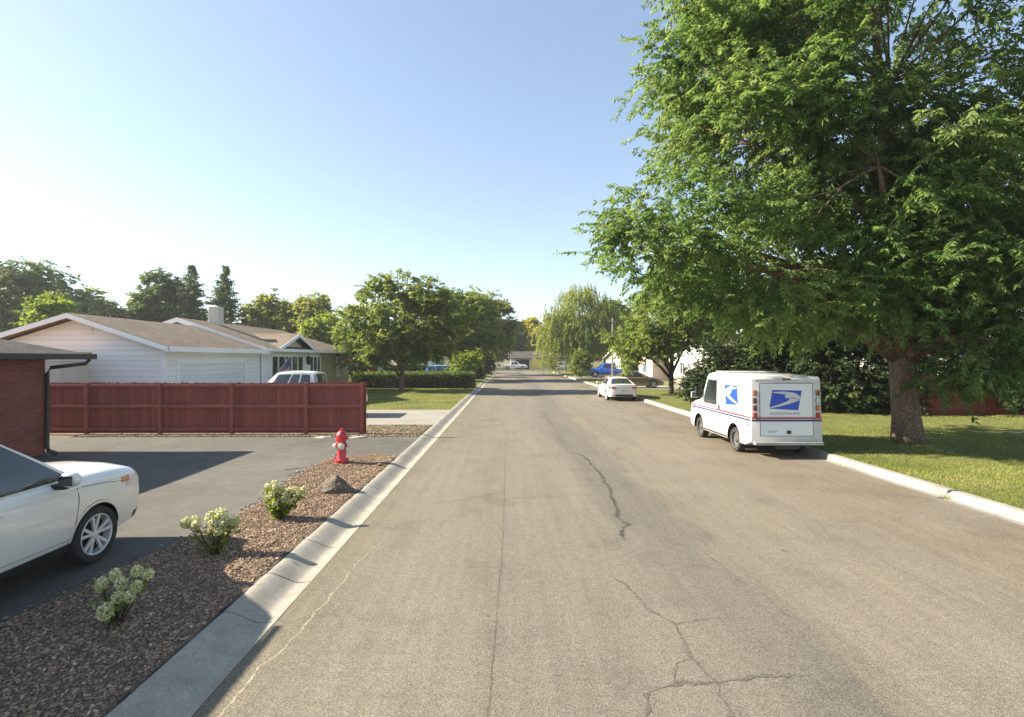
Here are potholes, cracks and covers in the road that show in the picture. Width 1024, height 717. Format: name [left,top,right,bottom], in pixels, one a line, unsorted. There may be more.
crack [611,554,810,717]
crack [512,412,631,540]
crack [218,545,375,717]
